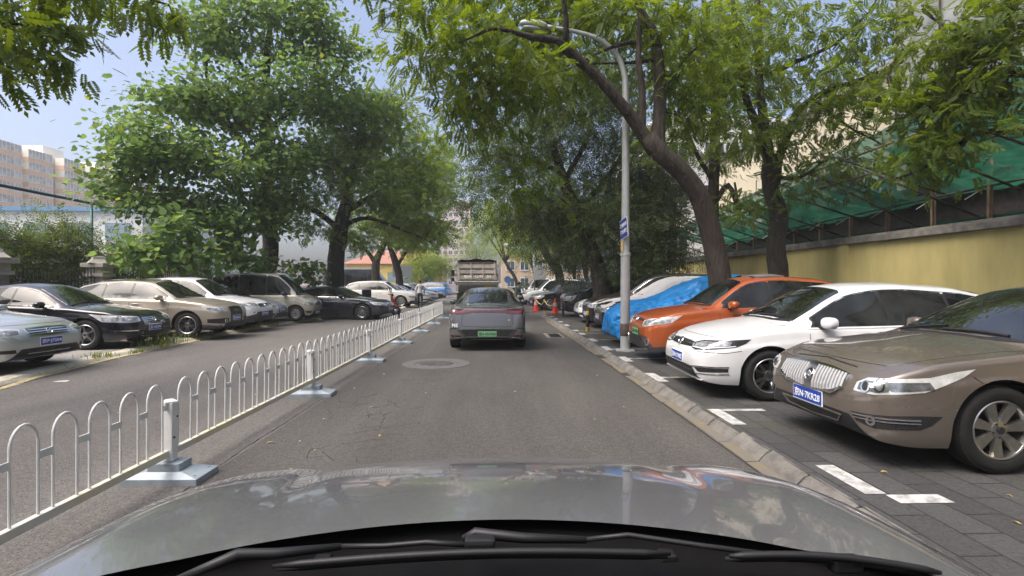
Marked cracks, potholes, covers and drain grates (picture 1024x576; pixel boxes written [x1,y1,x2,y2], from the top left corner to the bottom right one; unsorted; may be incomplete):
manhole cover [402,358,470,369]
